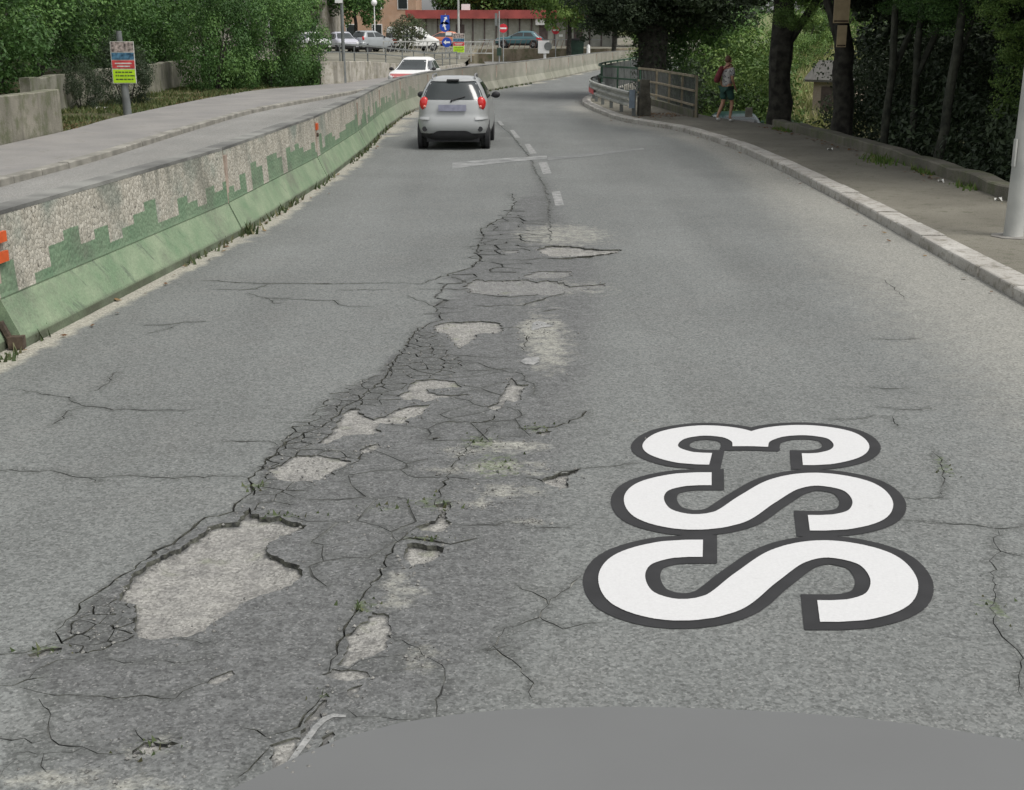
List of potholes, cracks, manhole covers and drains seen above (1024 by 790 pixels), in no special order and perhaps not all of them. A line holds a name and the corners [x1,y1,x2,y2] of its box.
pothole [403,543,444,570]
pothole [537,245,622,258]
pothole [463,279,605,296]
pothole [395,379,469,402]
crack [0,194,613,777]
pothole [118,507,307,640]
pothole [318,404,430,444]
pothole [434,321,504,347]
pothole [268,455,351,481]
pothole [337,612,392,667]
crack [908,520,1024,695]
